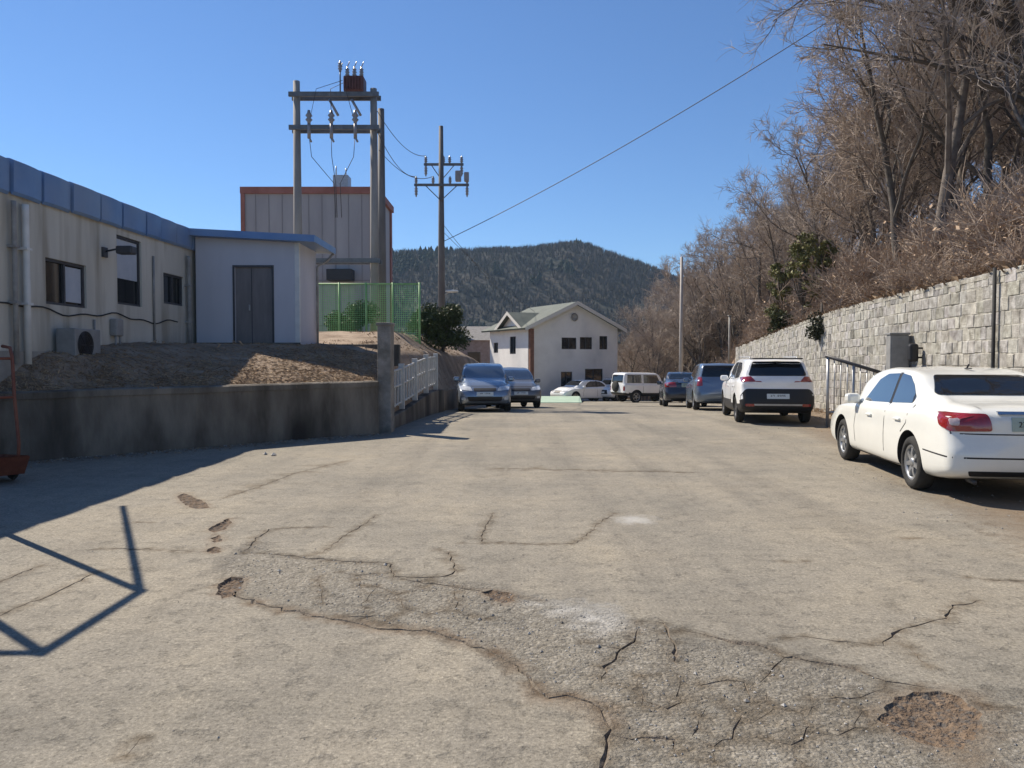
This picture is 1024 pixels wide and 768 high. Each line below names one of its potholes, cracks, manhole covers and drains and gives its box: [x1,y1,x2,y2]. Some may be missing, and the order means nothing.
pothole [208,519,232,532]
pothole [877,691,983,749]
pothole [482,590,515,603]
crack [232,513,979,768]
pothole [177,493,210,509]
pothole [215,577,243,598]
